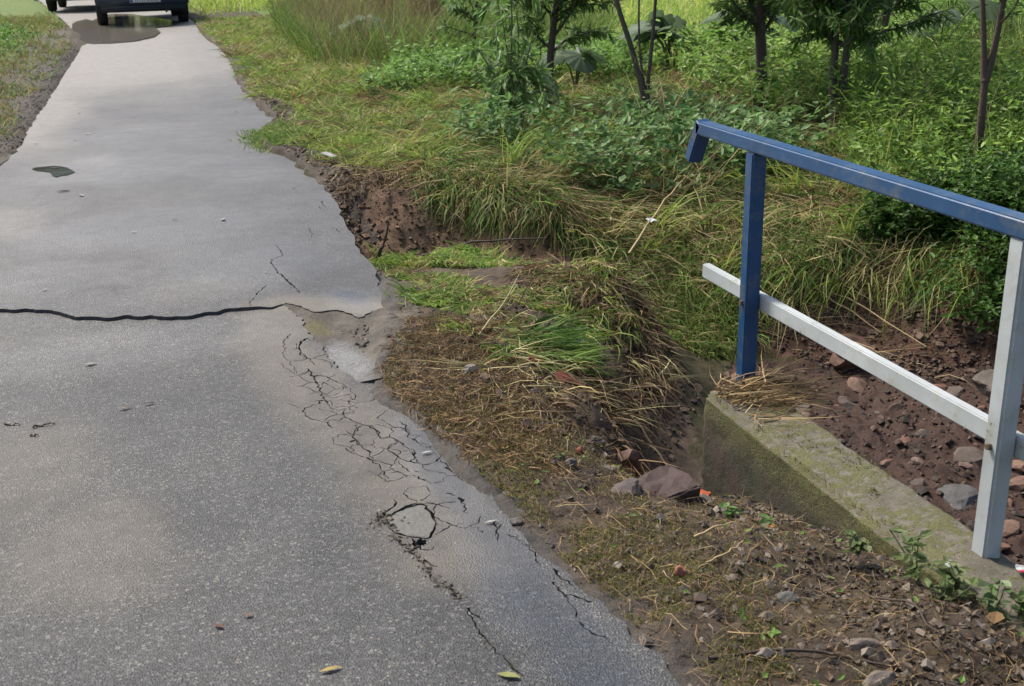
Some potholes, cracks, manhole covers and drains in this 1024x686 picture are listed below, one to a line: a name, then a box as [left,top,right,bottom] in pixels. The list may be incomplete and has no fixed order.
crack [492,521,608,639]
crack [0,244,300,321]
pothole [285,300,420,383]
crack [282,334,525,678]
